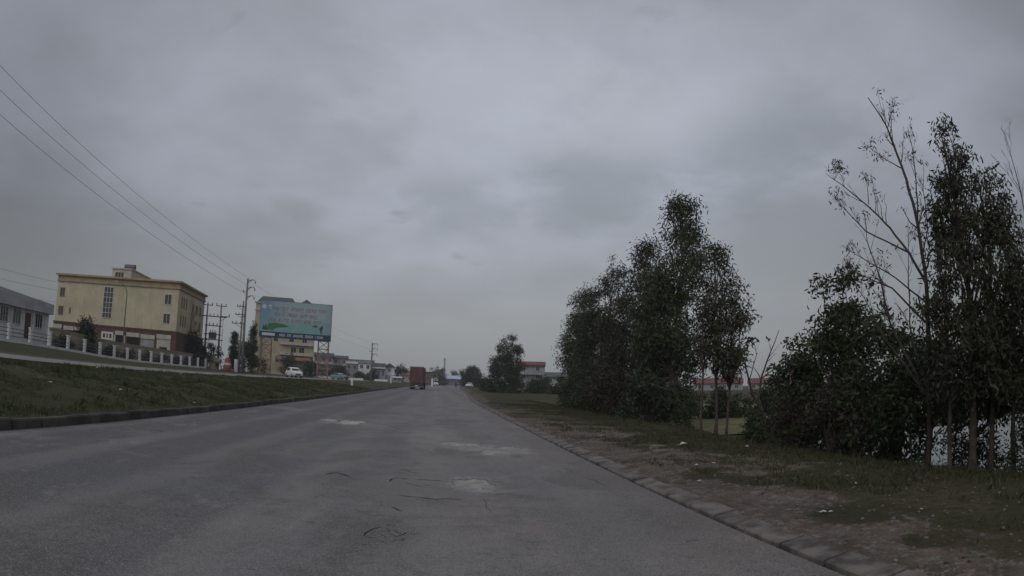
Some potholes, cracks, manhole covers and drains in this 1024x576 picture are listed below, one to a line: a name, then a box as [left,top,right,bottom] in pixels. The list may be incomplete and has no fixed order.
crack [358,469,461,544]
